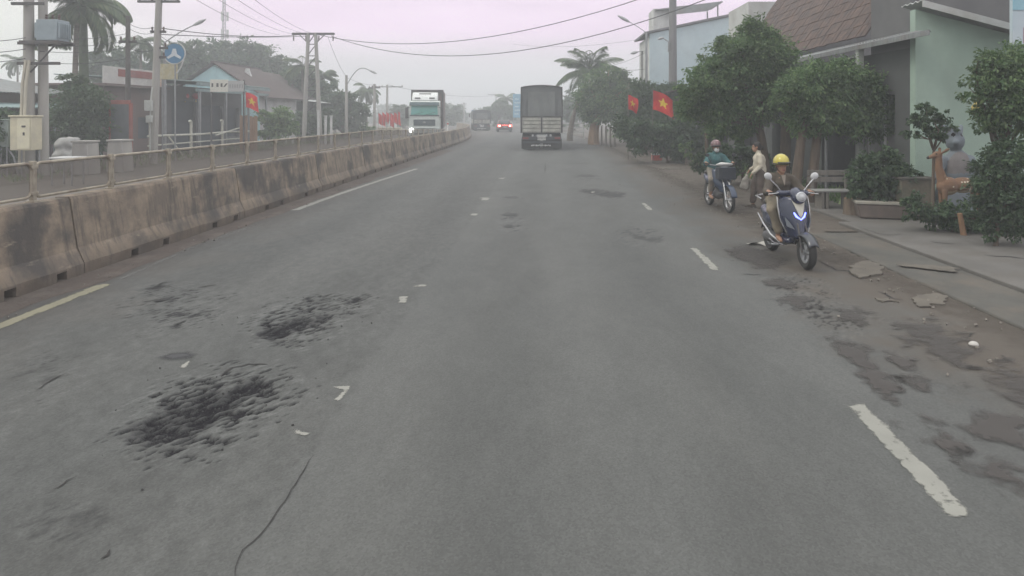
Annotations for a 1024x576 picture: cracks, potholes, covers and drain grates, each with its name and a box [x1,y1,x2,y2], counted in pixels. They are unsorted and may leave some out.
pothole [219,289,394,354]
pothole [492,211,536,233]
pothole [573,187,629,200]
pothole [90,355,322,481]
crack [235,458,311,572]
